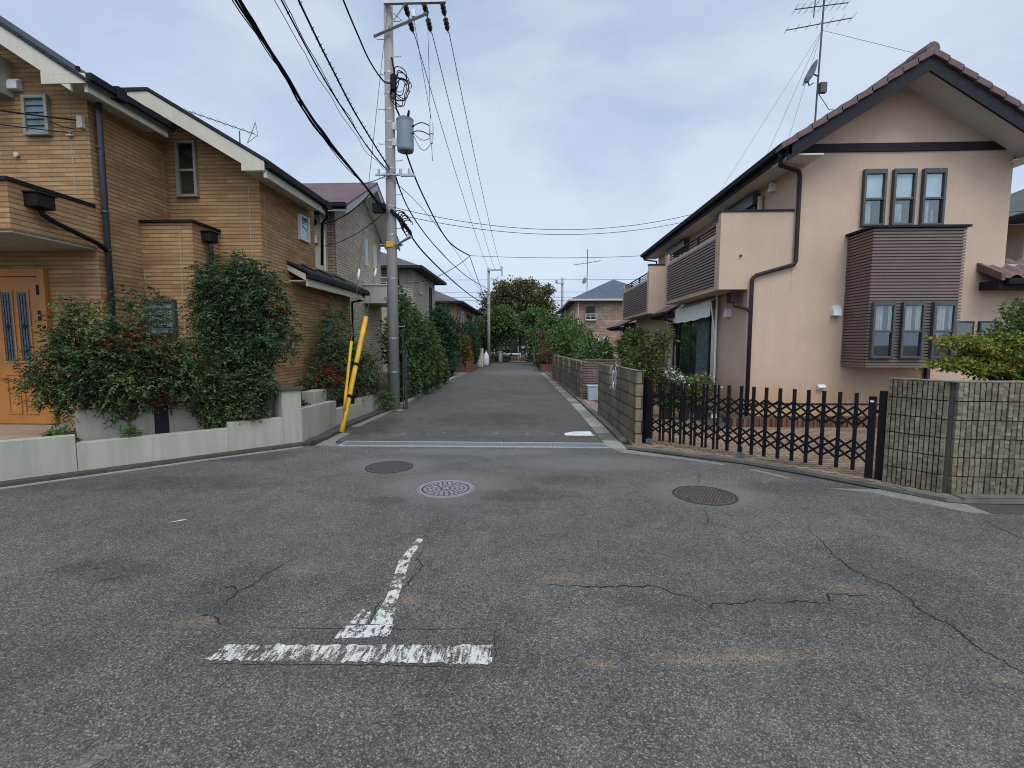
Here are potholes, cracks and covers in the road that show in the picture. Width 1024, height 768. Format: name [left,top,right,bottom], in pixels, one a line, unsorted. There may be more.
manhole cover [417,480,474,498]
crack [202,562,286,625]
crack [548,531,1024,673]
manhole cover [365,461,413,474]
manhole cover [672,486,739,506]
crack [368,548,427,624]
